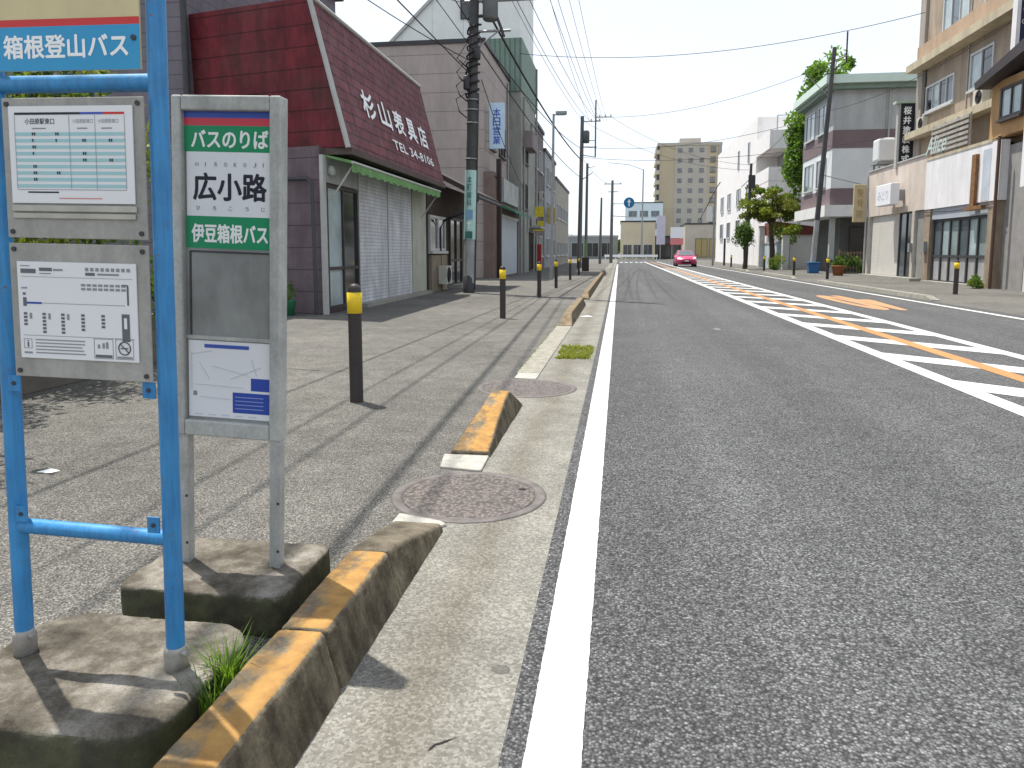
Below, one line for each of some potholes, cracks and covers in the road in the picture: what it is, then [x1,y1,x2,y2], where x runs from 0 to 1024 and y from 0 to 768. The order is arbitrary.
manhole cover [477,379,577,398]
manhole cover [391,472,546,524]
